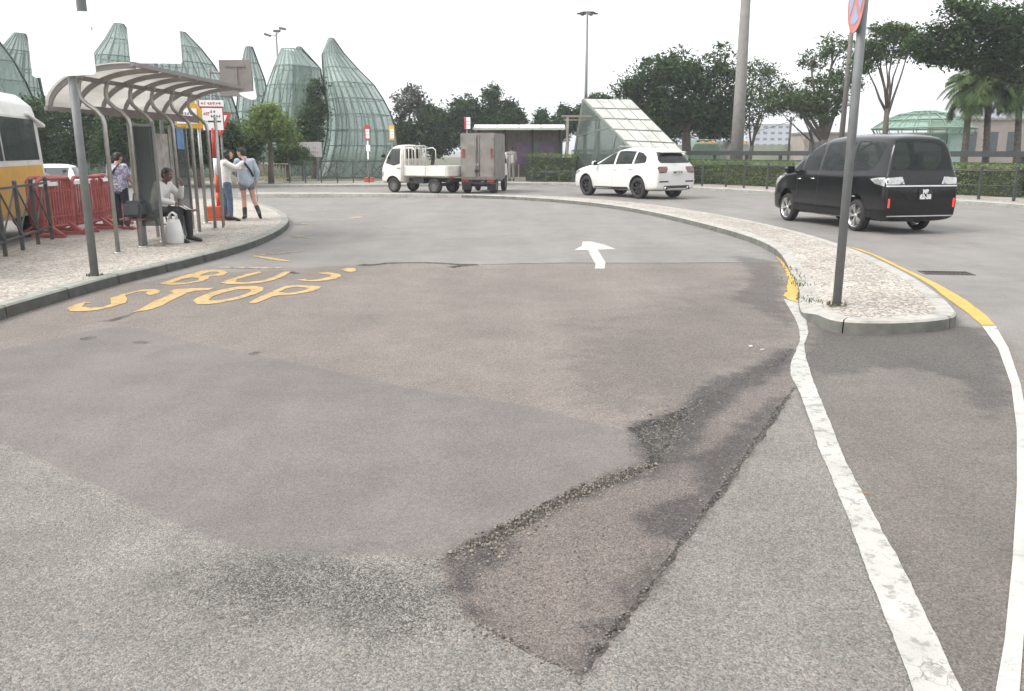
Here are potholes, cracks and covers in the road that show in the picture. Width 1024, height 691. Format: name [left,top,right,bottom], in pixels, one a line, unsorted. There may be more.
pothole [625,395,707,467]
